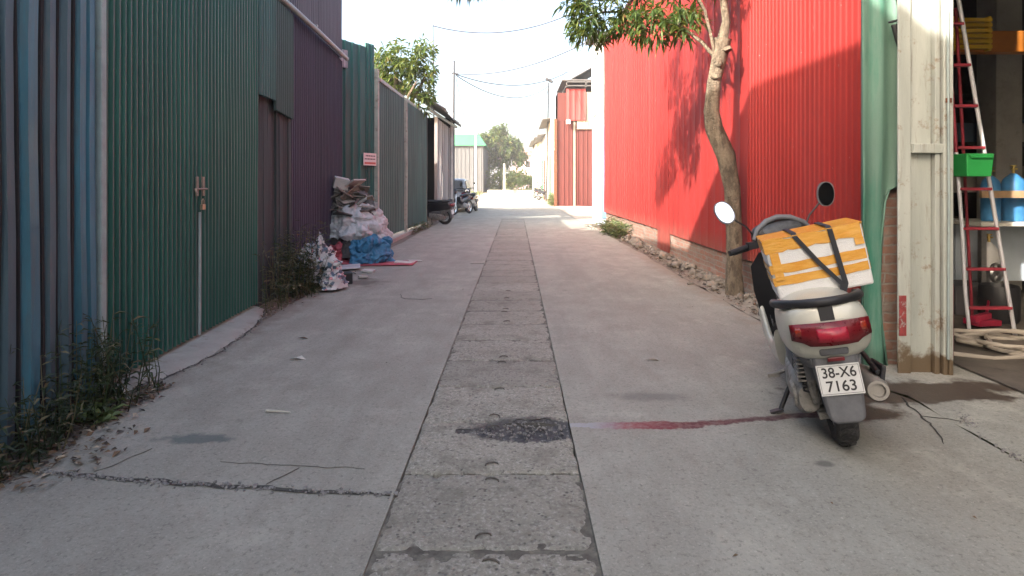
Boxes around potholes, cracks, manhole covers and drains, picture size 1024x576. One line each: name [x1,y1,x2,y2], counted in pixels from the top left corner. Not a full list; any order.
crack [904,400,1024,462]
crack [15,448,398,499]
pothole [455,419,572,444]
